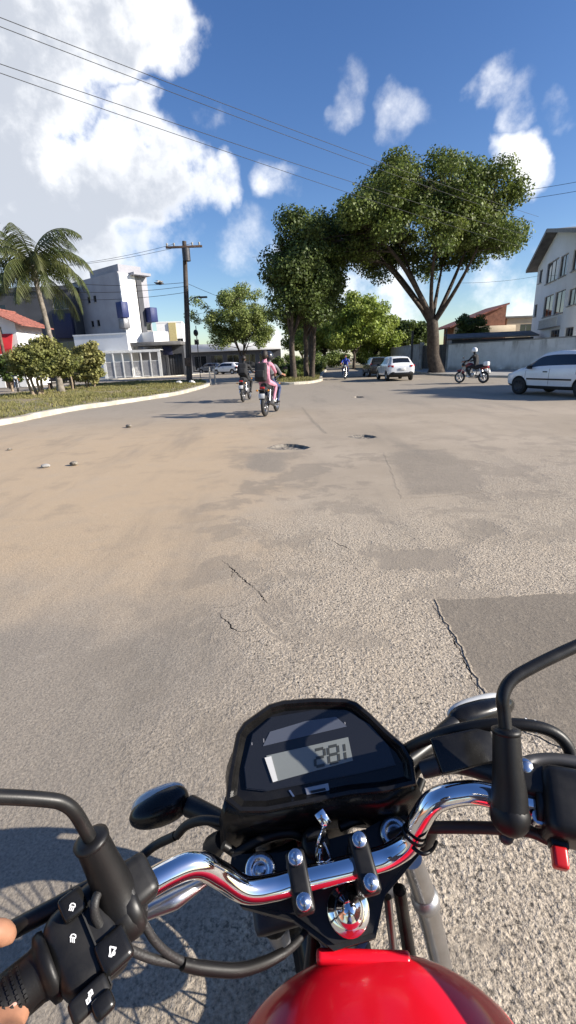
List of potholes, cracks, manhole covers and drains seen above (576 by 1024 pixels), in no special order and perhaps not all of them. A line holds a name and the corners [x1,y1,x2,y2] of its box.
crack [214,560,267,632]
crack [432,604,479,693]
